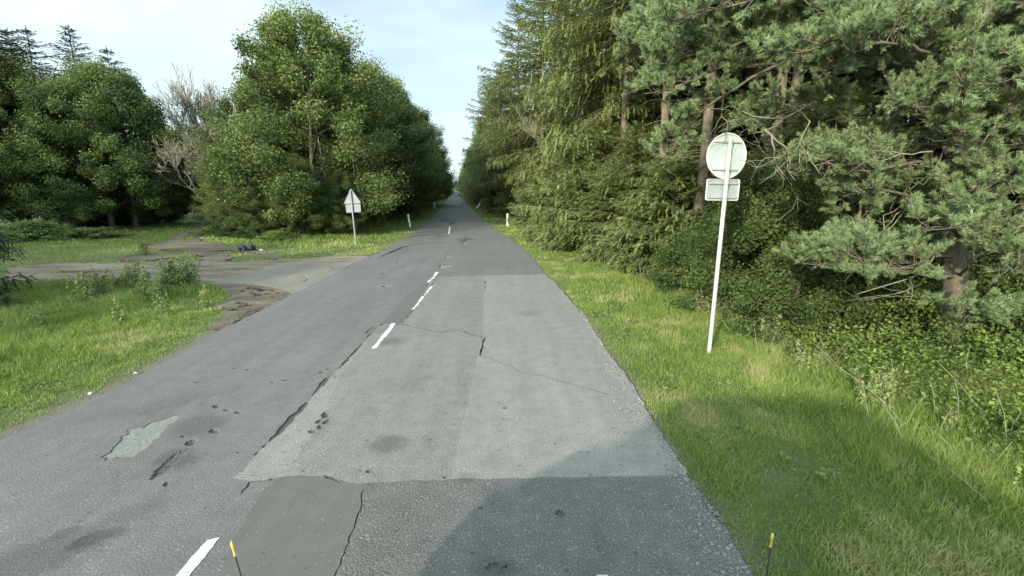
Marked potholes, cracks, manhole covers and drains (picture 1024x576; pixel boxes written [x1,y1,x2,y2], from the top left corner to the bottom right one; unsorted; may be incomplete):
crack [241,478,275,494]
pothole [149,447,191,480]
crack [324,475,364,576]
crack [366,277,610,395]
crack [381,219,470,268]
